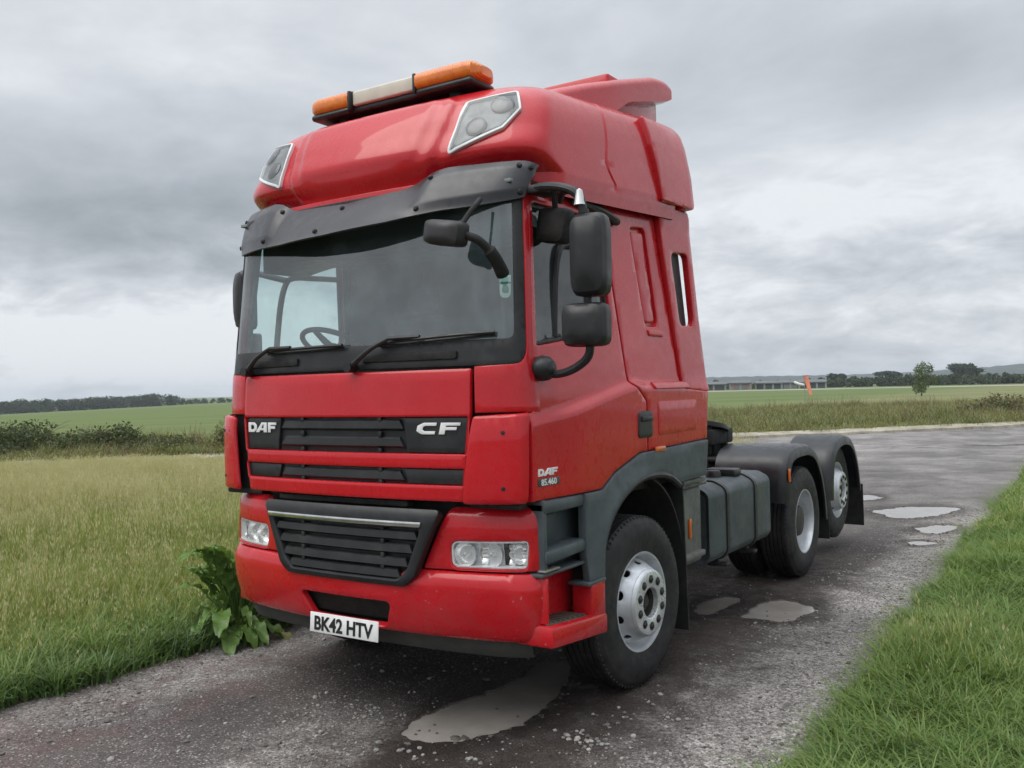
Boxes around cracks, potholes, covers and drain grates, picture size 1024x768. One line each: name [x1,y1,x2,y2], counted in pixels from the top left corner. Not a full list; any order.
pothole [689,594,747,615]
pothole [867,505,963,519]
pothole [738,597,821,624]
pothole [911,523,957,535]
pothole [391,657,577,746]
